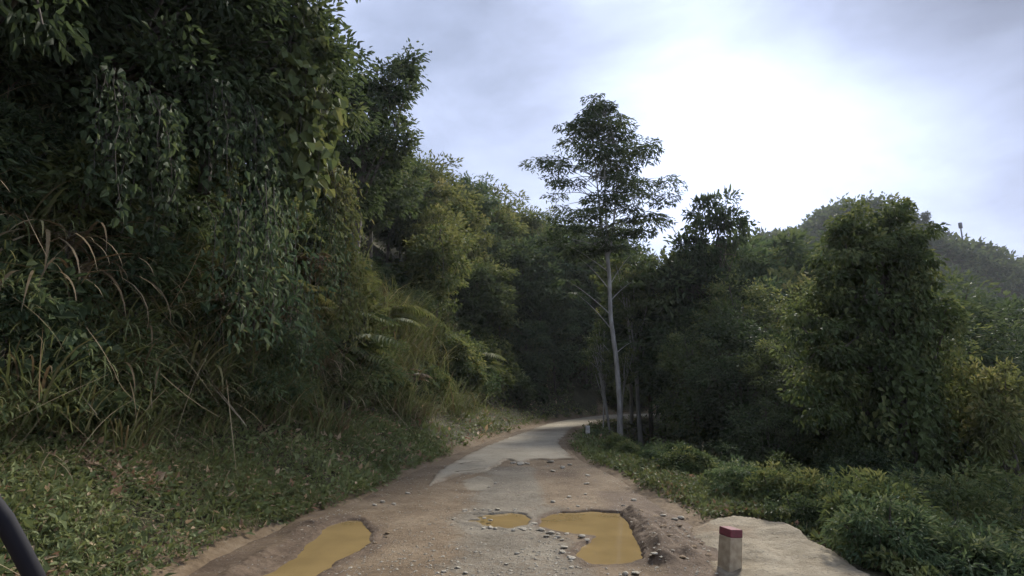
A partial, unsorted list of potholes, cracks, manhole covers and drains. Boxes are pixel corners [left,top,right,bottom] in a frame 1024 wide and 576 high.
pothole [535,505,653,567]
pothole [451,510,537,531]
pothole [244,517,383,576]
